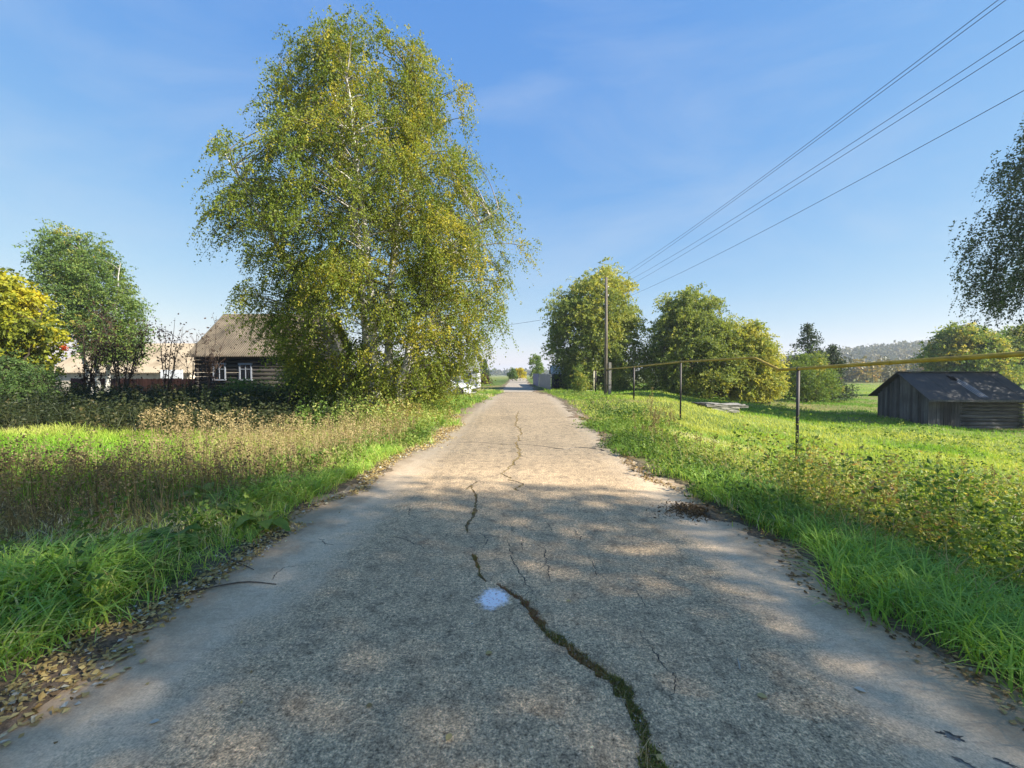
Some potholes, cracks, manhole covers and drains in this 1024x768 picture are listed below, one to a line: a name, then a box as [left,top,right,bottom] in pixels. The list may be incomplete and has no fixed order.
crack [474,402,604,491]
crack [465,481,682,768]
pothole [935,730,966,743]
